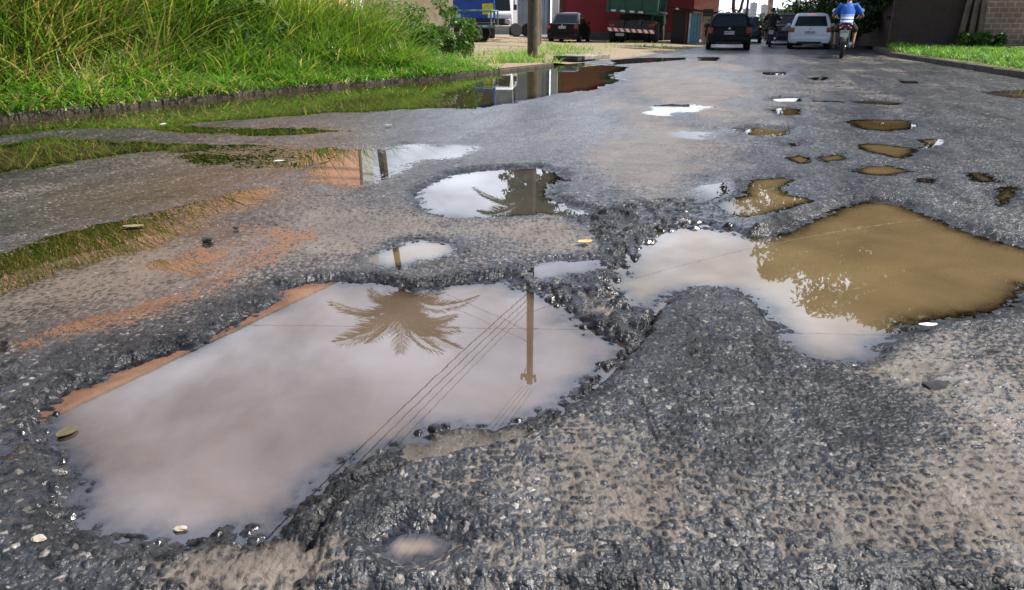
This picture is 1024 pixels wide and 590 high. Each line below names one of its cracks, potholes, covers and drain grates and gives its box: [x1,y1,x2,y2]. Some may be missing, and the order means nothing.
pothole [354,505,479,574]
pothole [839,139,937,160]
pothole [733,123,803,137]
pothole [827,114,938,133]
pothole [593,193,1024,370]
pothole [351,234,470,273]
pothole [706,173,828,220]
pothole [13,267,636,562]
pothole [405,162,611,219]
